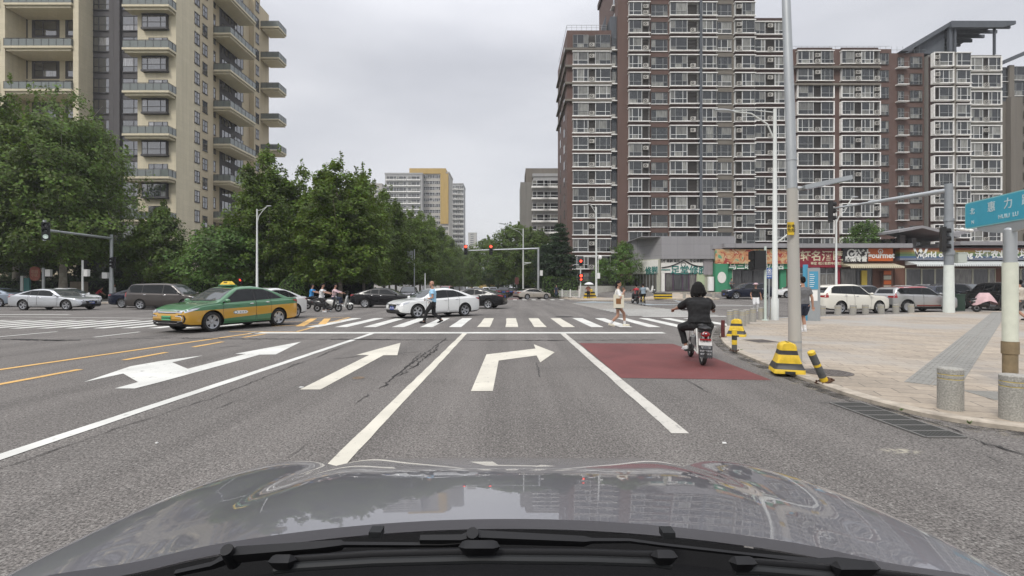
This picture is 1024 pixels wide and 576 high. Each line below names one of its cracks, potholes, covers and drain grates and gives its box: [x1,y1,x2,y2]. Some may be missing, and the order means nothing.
crack [356,338,446,403]
drain grate [829,402,968,438]
crack [972,437,1022,465]
